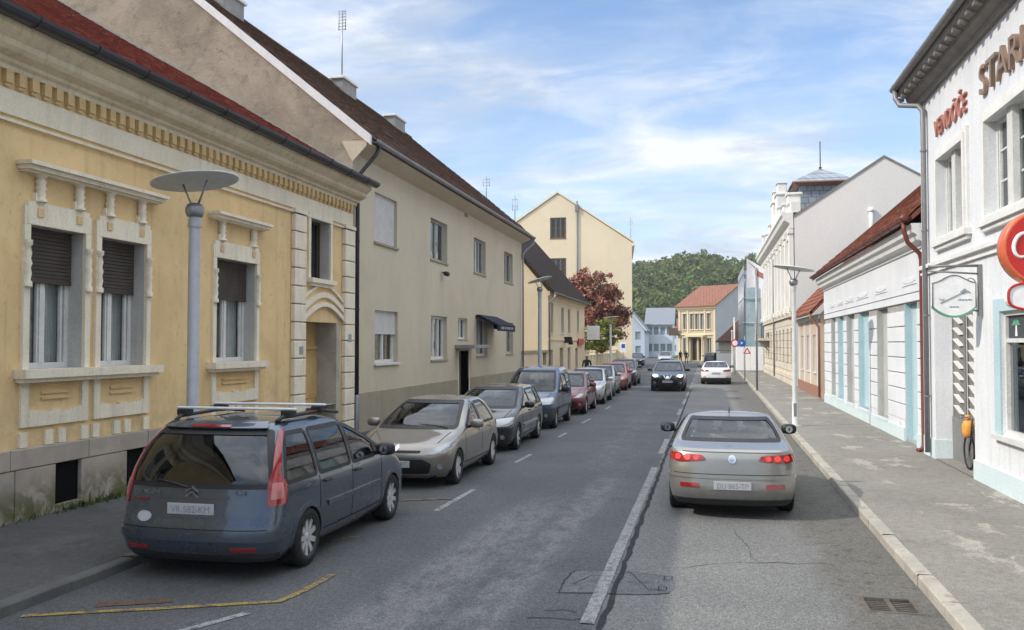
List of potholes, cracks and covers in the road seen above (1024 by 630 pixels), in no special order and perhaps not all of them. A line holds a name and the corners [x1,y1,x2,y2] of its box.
crack [527,570,672,620]
drain grate [857,596,926,615]
crack [685,532,826,568]
